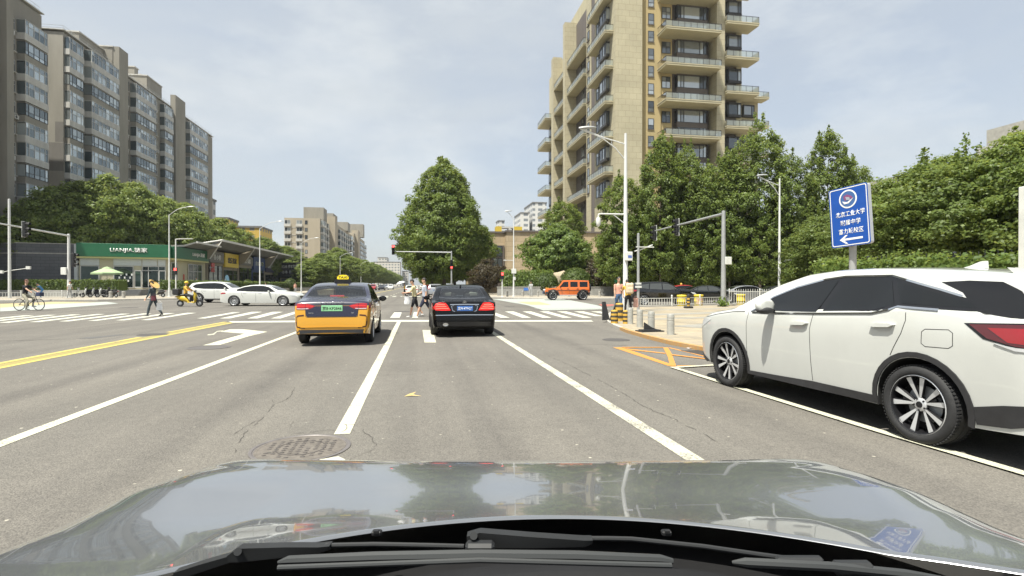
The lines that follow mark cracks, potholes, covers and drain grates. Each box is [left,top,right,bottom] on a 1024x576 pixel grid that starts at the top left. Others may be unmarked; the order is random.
crack [263,356,713,440]
manhole cover [248,434,351,460]
crack [235,391,377,459]
